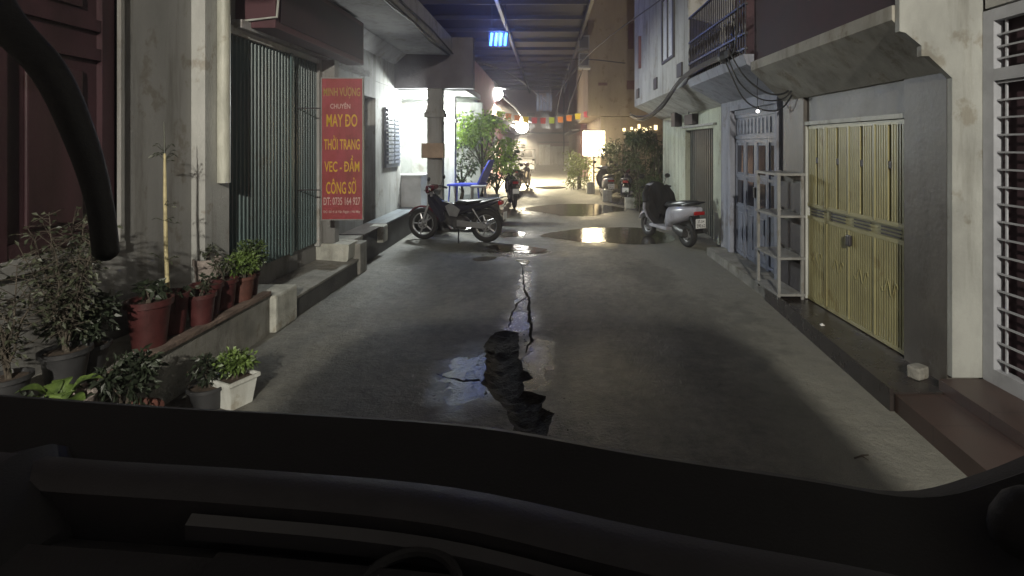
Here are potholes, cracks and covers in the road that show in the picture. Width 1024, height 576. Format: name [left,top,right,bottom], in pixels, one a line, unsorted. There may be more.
pothole [481,330,555,436]
crack [508,264,534,353]
crack [437,374,480,382]
